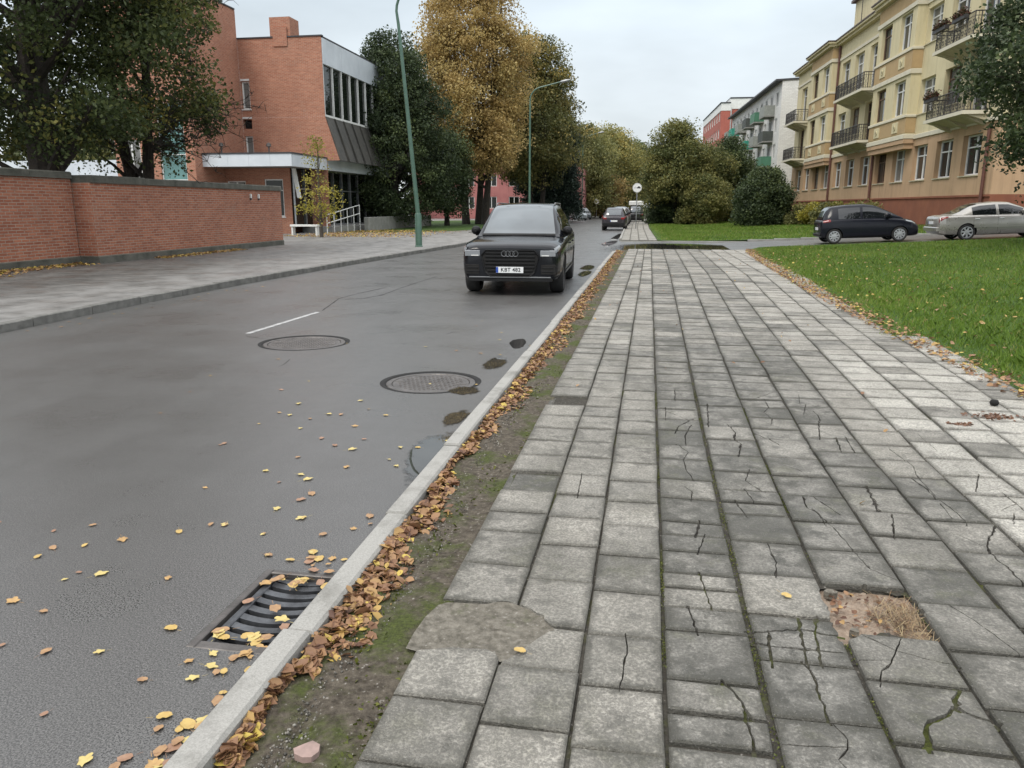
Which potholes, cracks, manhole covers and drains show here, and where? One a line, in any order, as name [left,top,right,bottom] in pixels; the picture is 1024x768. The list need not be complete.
manhole cover [258,335,350,350]
pothole [820,591,931,645]
drain grate [186,569,334,655]
crack [922,689,1001,754]
crack [748,618,848,758]
crack [721,683,757,758]
manhole cover [380,371,481,394]
crack [687,574,712,634]
crack [865,488,894,538]
crack [619,636,628,692]
crack [799,401,855,457]
crack [986,517,1023,587]
